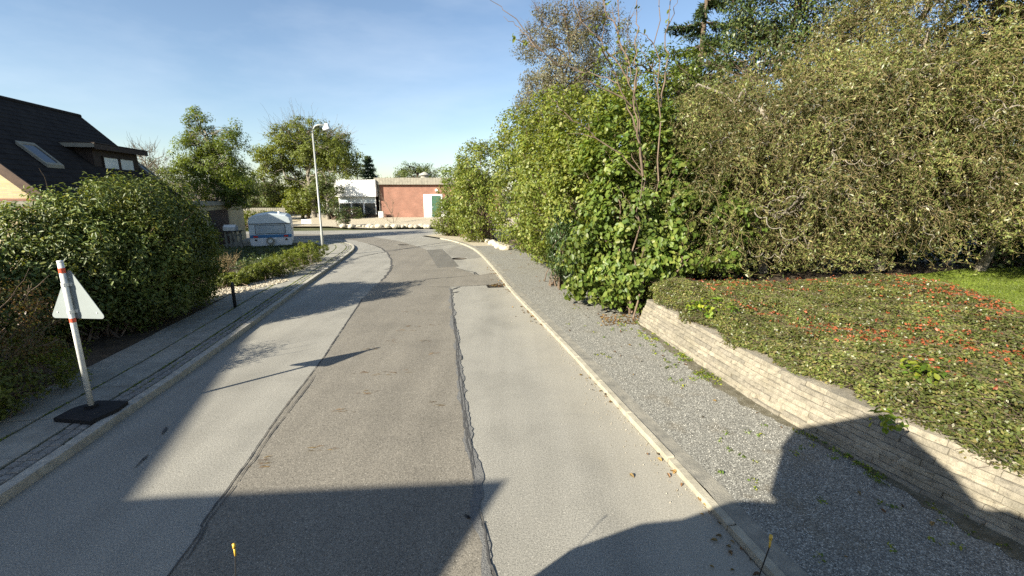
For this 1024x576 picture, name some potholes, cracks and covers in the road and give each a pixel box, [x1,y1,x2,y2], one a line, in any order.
crack [420,268,496,576]
